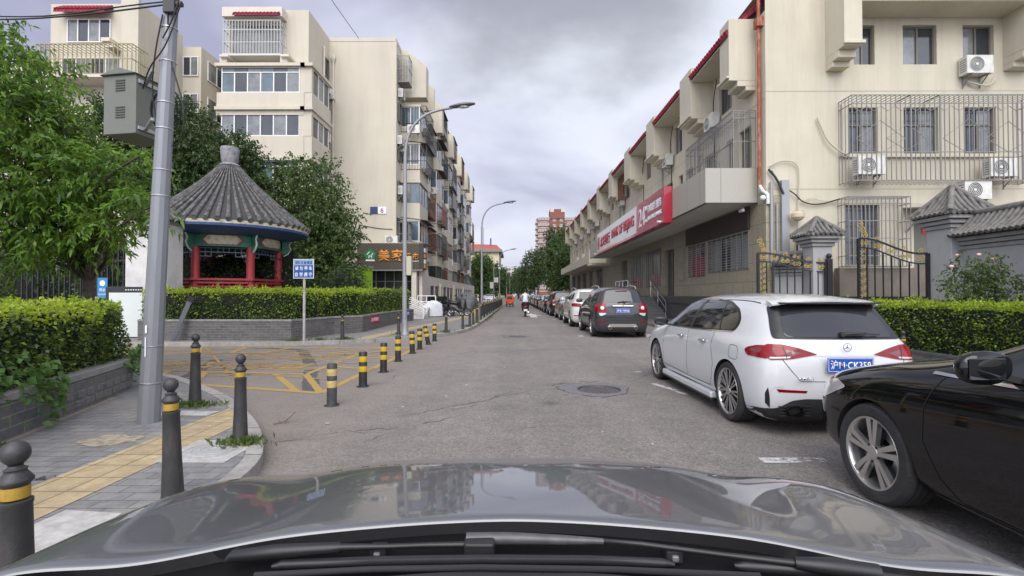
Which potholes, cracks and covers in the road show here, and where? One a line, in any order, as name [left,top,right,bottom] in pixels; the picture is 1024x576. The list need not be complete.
manhole cover [553,381,629,397]
